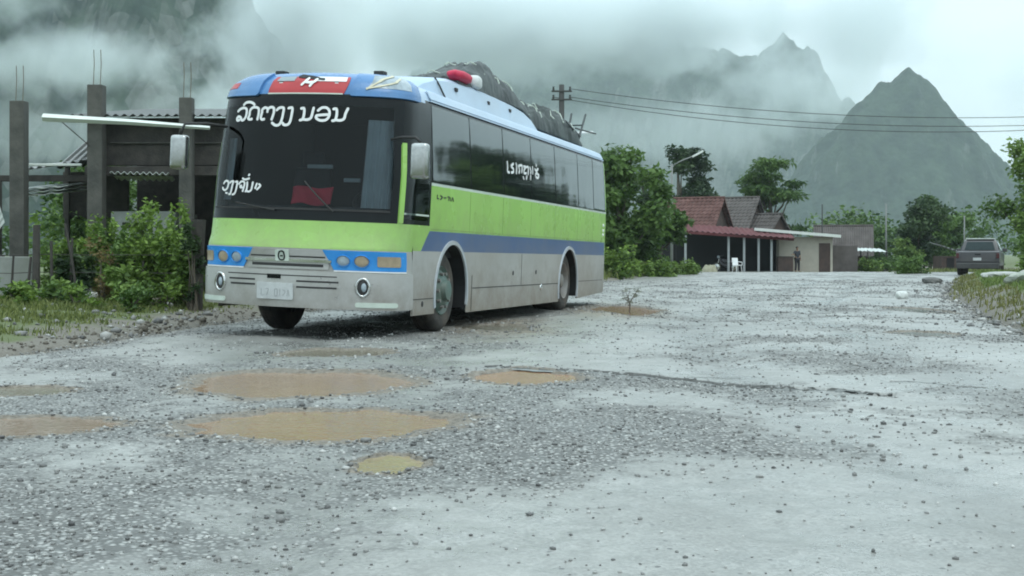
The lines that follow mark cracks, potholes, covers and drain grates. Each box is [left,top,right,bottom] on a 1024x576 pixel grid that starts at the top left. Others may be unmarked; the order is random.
pothole [171,368,433,401]
pothole [0,414,138,438]
pothole [0,384,84,397]
crack [482,365,986,397]
pothole [348,452,433,475]
pothole [462,366,590,386]
pothole [163,407,481,444]
pothole [586,305,668,316]
